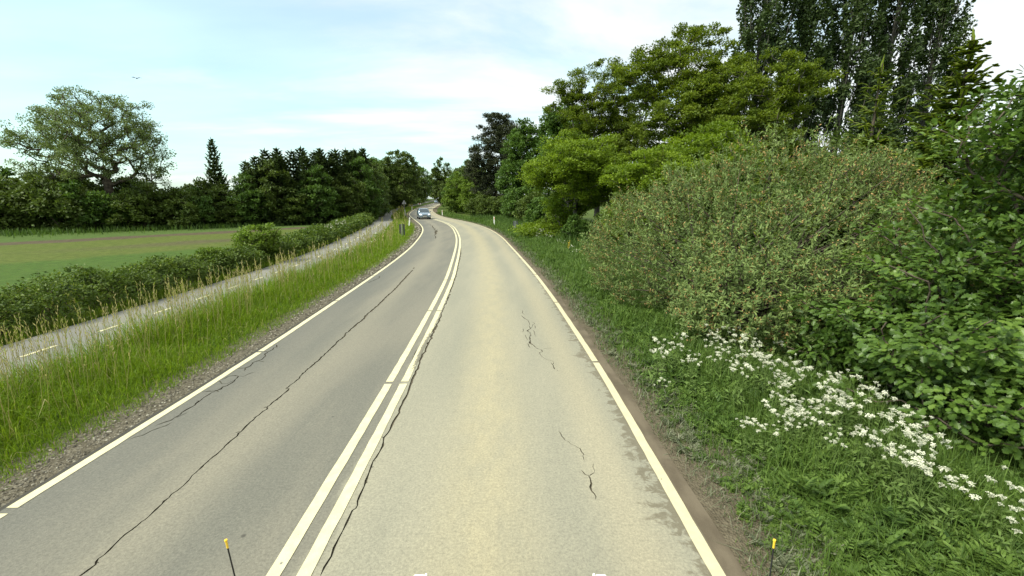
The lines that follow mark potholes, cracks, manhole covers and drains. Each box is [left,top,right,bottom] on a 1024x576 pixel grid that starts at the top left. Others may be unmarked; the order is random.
crack [522,310,555,369]
crack [80,249,461,576]
crack [560,433,596,500]
